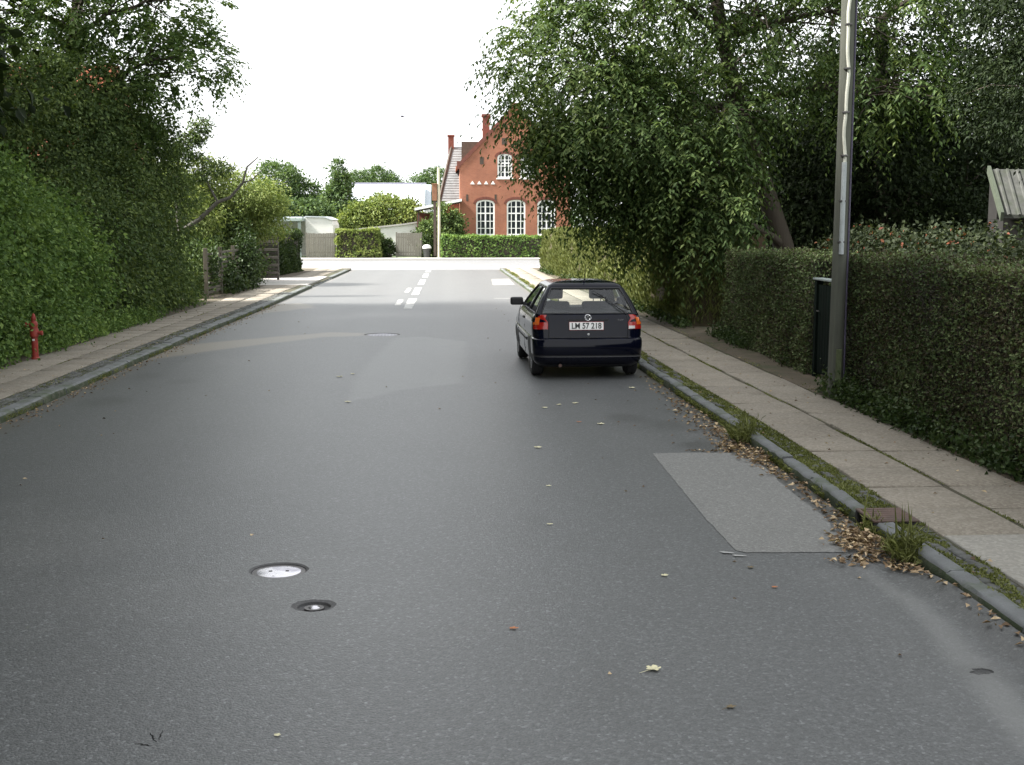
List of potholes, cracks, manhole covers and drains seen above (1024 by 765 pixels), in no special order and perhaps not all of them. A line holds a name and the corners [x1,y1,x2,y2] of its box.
drain grate [855,508,920,536]
manhole cover [291,599,337,612]
manhole cover [248,562,309,578]
